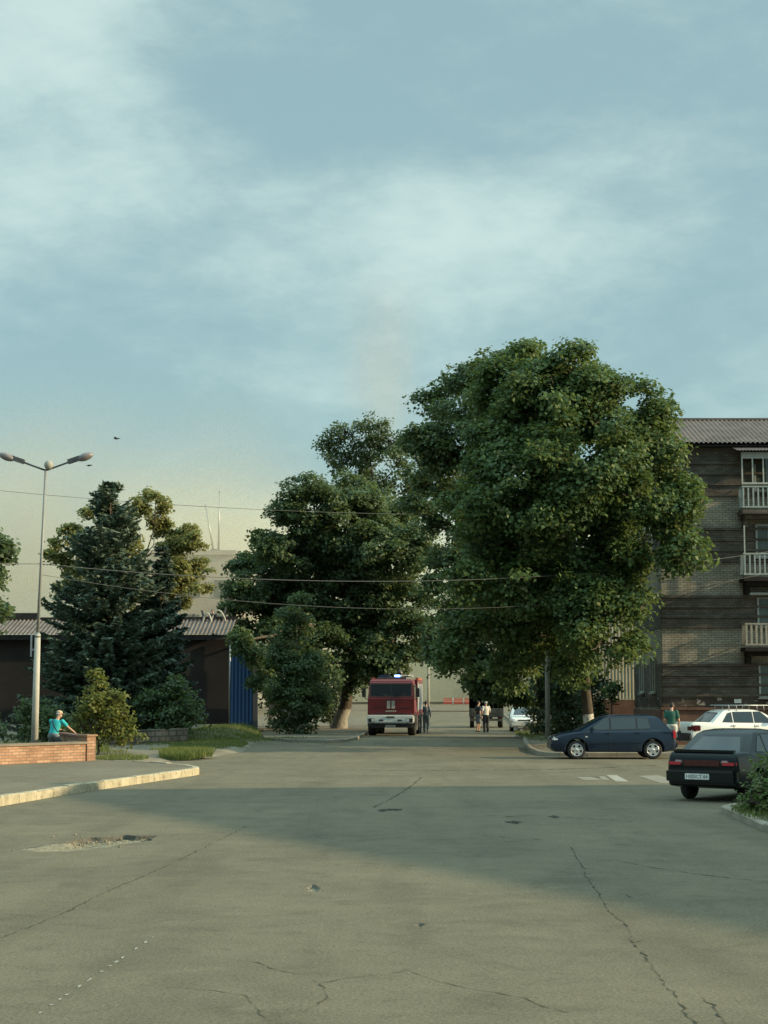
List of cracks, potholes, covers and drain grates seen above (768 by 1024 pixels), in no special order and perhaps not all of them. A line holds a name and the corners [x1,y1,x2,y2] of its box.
crack [258,952,412,1013]
crack [570,847,764,1024]
pothole [12,833,156,852]
